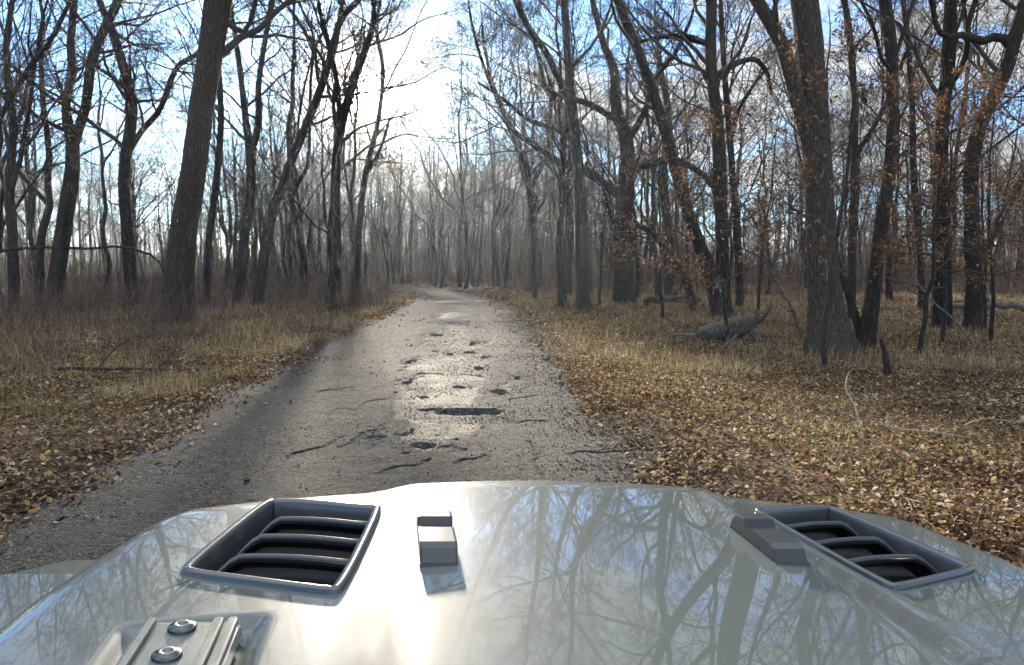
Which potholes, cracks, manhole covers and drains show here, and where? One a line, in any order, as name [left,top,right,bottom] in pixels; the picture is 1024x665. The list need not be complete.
crack [282,388,397,463]
pothole [435,408,506,416]
pothole [428,311,485,319]
pothole [410,441,439,449]
crack [382,417,546,473]
